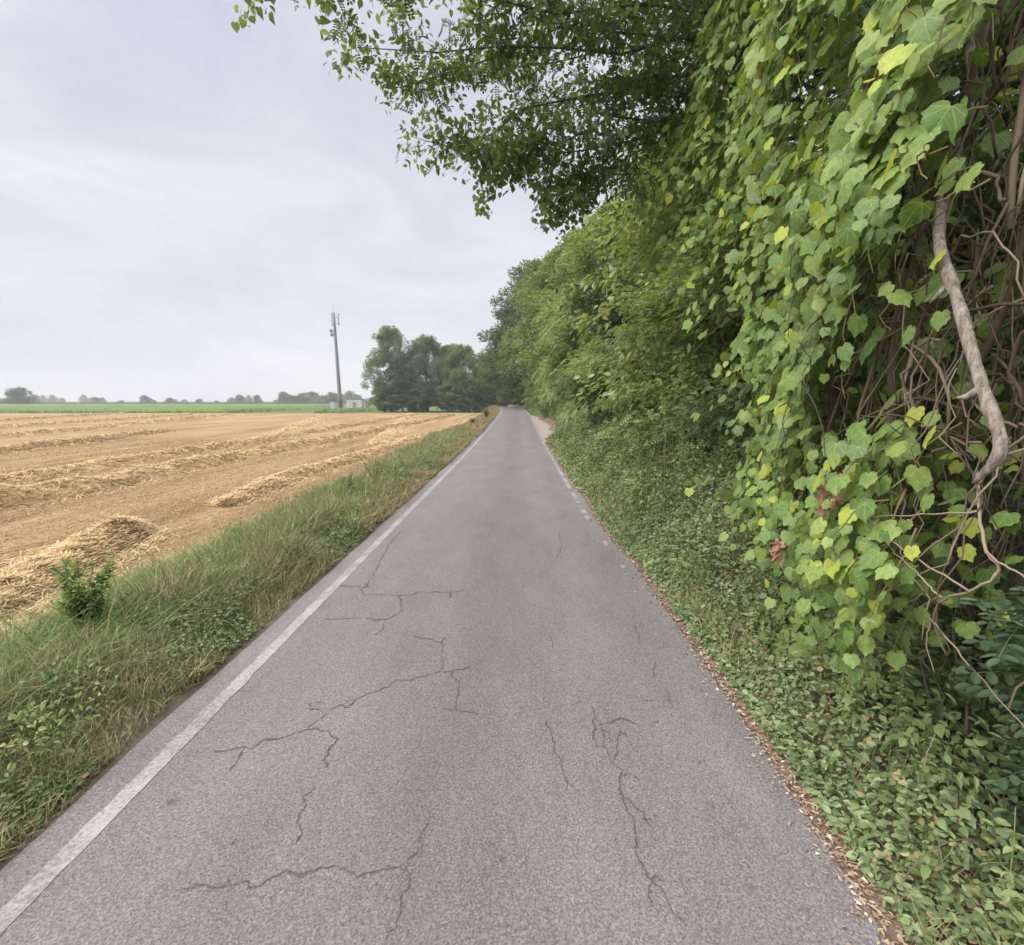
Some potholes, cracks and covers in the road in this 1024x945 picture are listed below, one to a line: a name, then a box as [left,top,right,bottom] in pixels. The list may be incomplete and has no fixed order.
crack [325,531,462,635]
crack [213,635,481,771]
crack [295,787,315,844]
crack [573,698,690,927]
crack [545,720,578,791]
crack [183,797,430,943]
